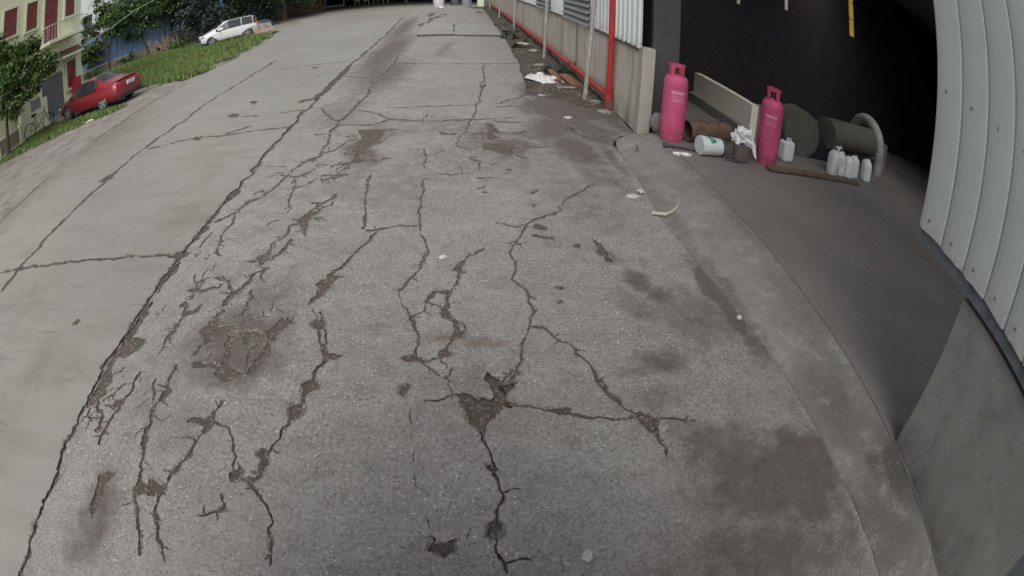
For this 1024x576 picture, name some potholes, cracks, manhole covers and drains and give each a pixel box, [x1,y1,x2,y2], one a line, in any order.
crack [80,54,696,566]
pothole [424,516,470,559]
